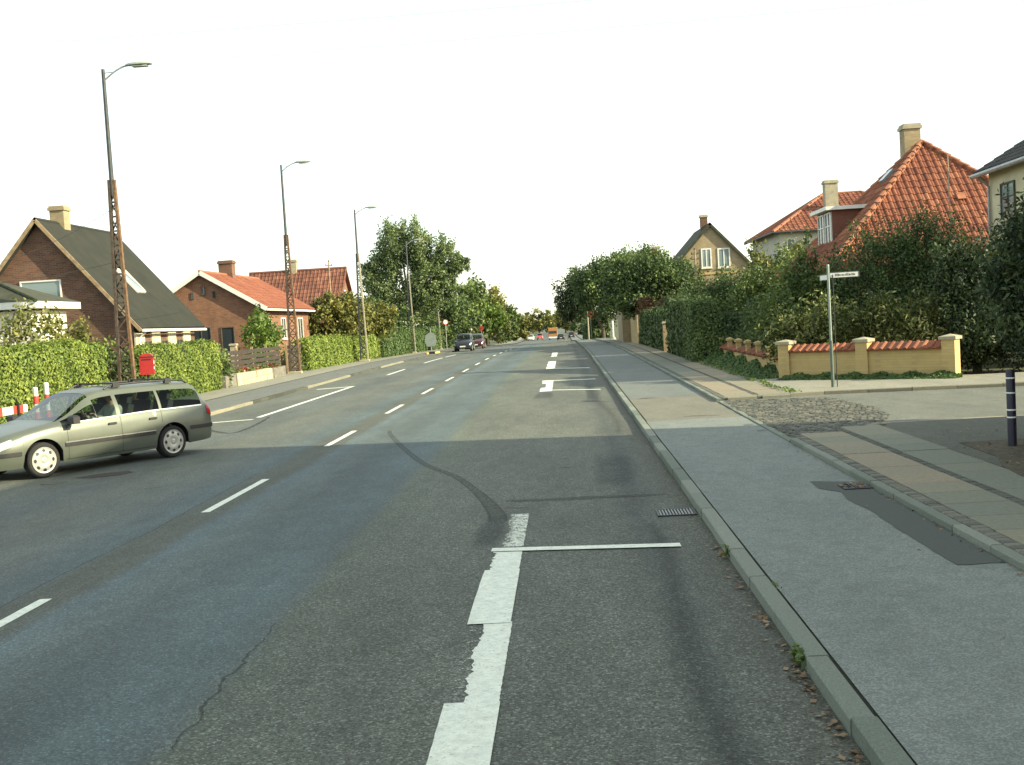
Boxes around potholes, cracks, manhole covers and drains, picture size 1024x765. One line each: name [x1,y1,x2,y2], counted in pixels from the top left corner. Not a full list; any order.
drain grate [655,508,697,517]
